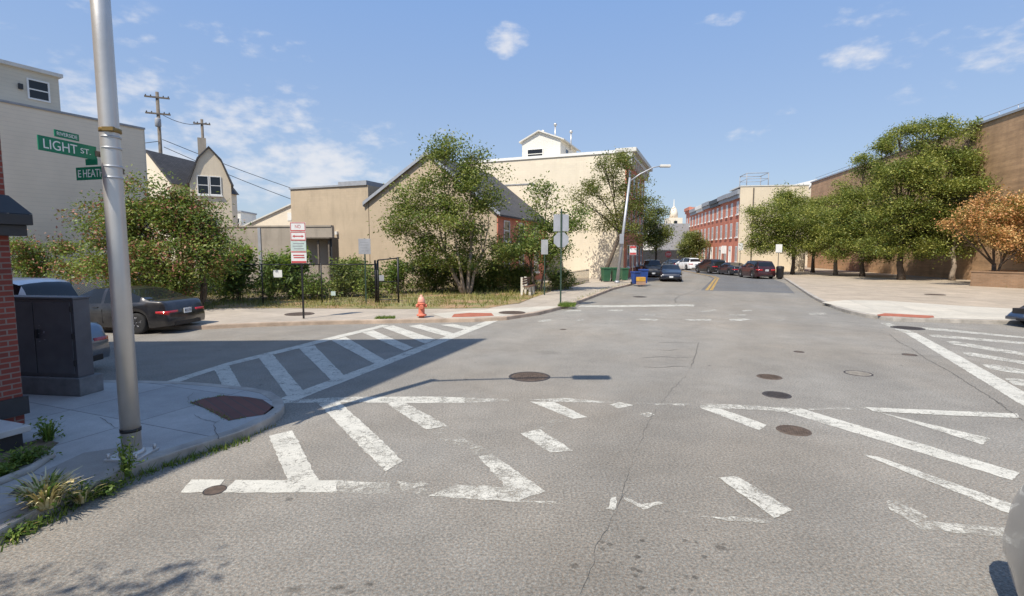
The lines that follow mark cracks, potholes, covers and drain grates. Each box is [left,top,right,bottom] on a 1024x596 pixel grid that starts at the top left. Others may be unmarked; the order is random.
utility cover [202,485,227,495]
manhole cover [776,425,812,436]
manhole cover [762,391,792,399]
crack [581,342,698,590]
manhole cover [509,372,550,382]
